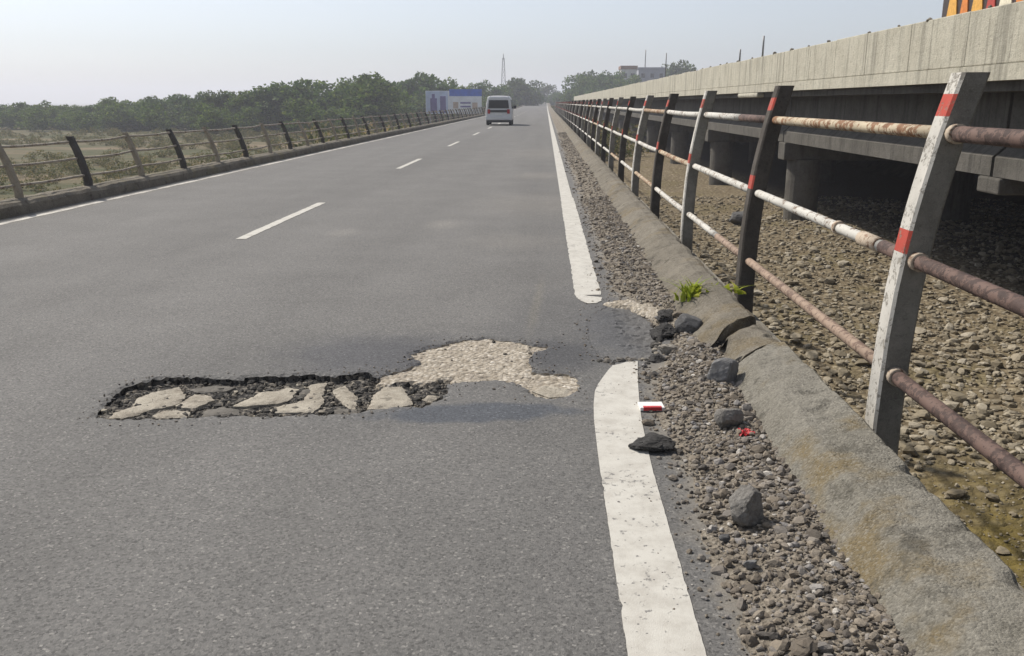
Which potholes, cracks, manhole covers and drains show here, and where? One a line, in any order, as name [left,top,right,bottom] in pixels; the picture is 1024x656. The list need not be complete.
pothole [96,339,579,420]
